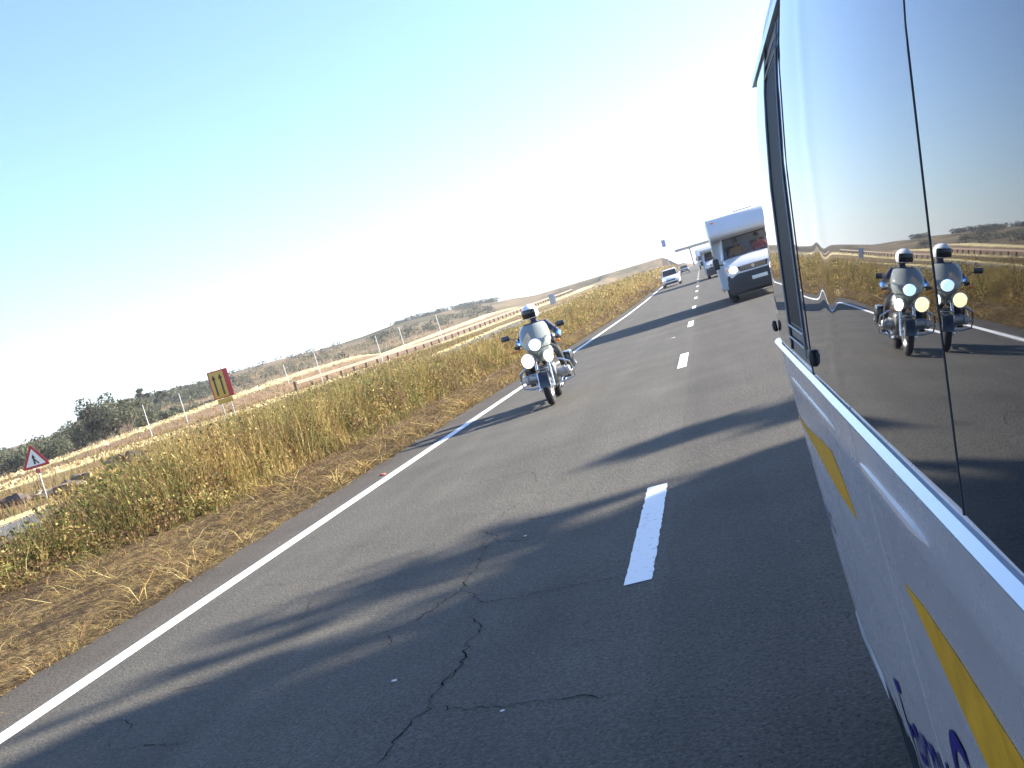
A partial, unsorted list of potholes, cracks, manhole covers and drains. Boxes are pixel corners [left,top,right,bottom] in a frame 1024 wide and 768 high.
crack [377,539,628,764]
